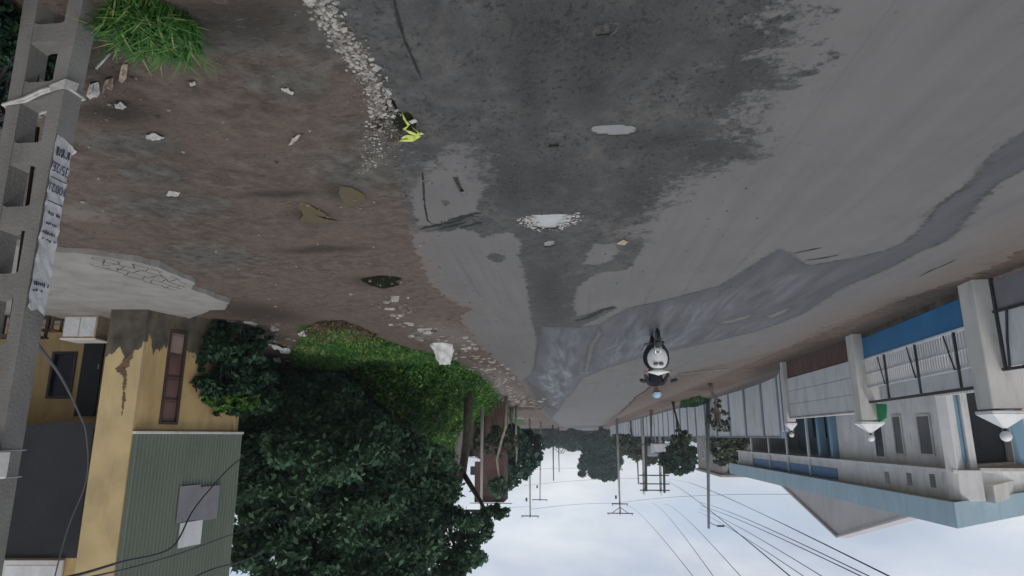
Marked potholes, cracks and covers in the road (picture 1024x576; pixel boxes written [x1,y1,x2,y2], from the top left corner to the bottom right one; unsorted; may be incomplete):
crack [419,173,483,230]
pothole [517,212,582,232]
crack [393,0,421,78]
